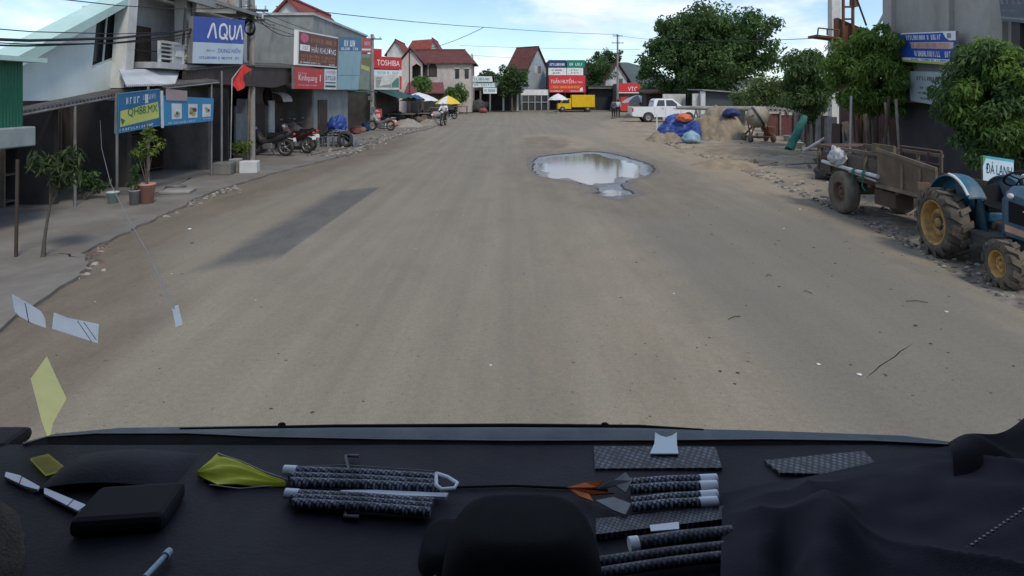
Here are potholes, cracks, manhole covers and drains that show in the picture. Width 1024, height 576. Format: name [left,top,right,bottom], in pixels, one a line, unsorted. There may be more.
crack [866,343,913,378]
pothole [531,151,656,199]
